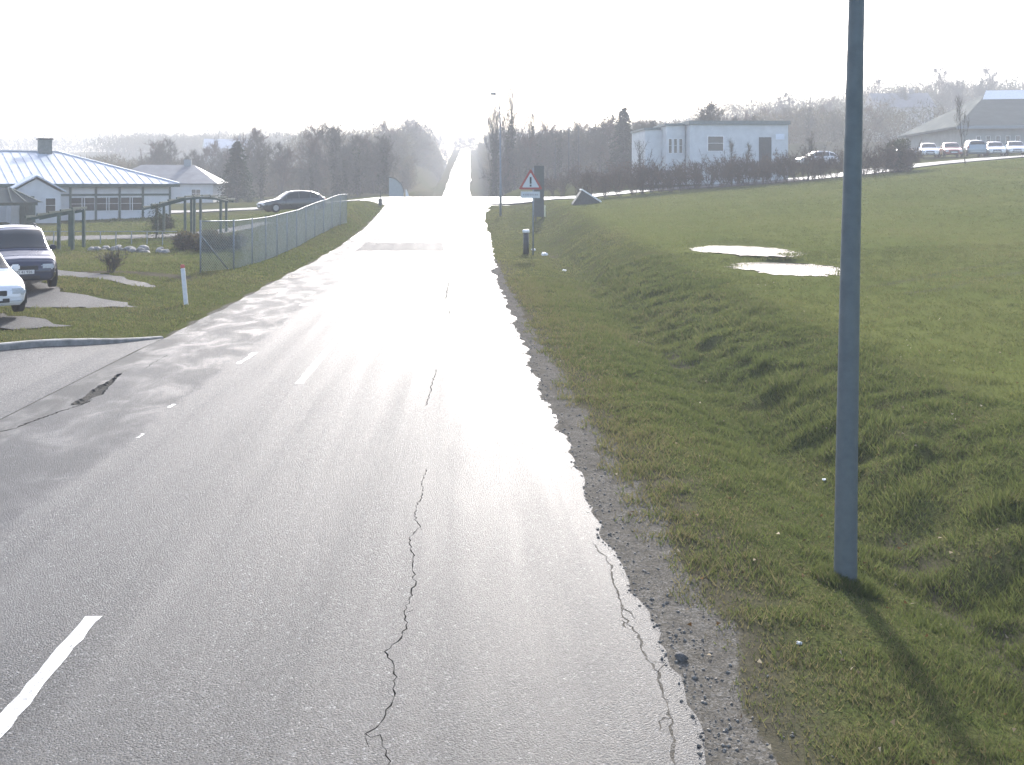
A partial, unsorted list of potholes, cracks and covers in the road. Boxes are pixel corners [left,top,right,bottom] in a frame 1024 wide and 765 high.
pothole [69,373,122,406]
crack [365,469,427,764]
